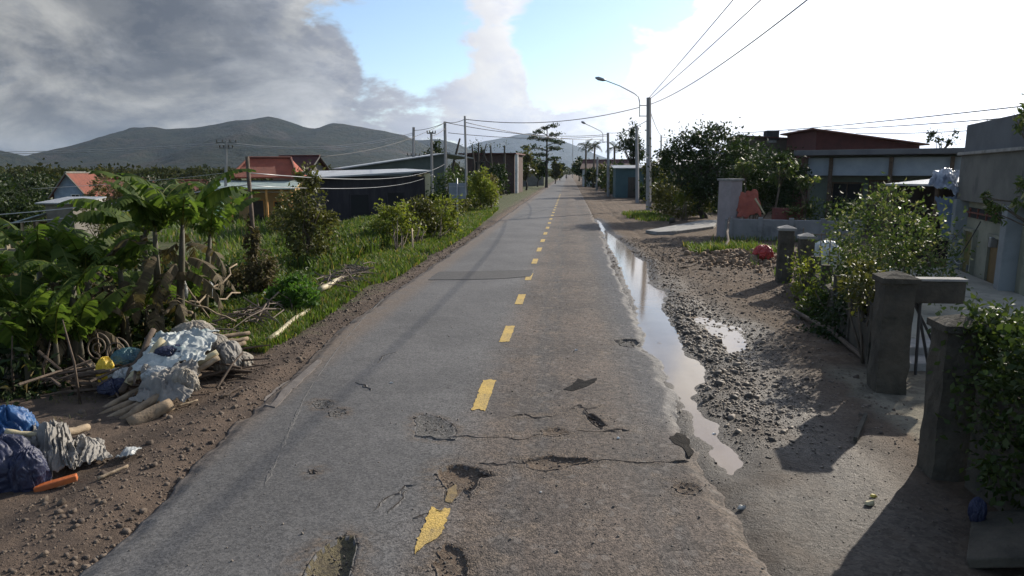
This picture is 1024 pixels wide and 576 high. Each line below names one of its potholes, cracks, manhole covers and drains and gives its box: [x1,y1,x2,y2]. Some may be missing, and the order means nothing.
pothole [303,532,360,576]
crack [373,485,428,519]
pothole [586,413,607,429]
pothole [614,338,641,348]
pothole [434,464,493,500]
pothole [312,400,334,409]
crack [415,413,551,441]
pothole [432,543,469,576]
